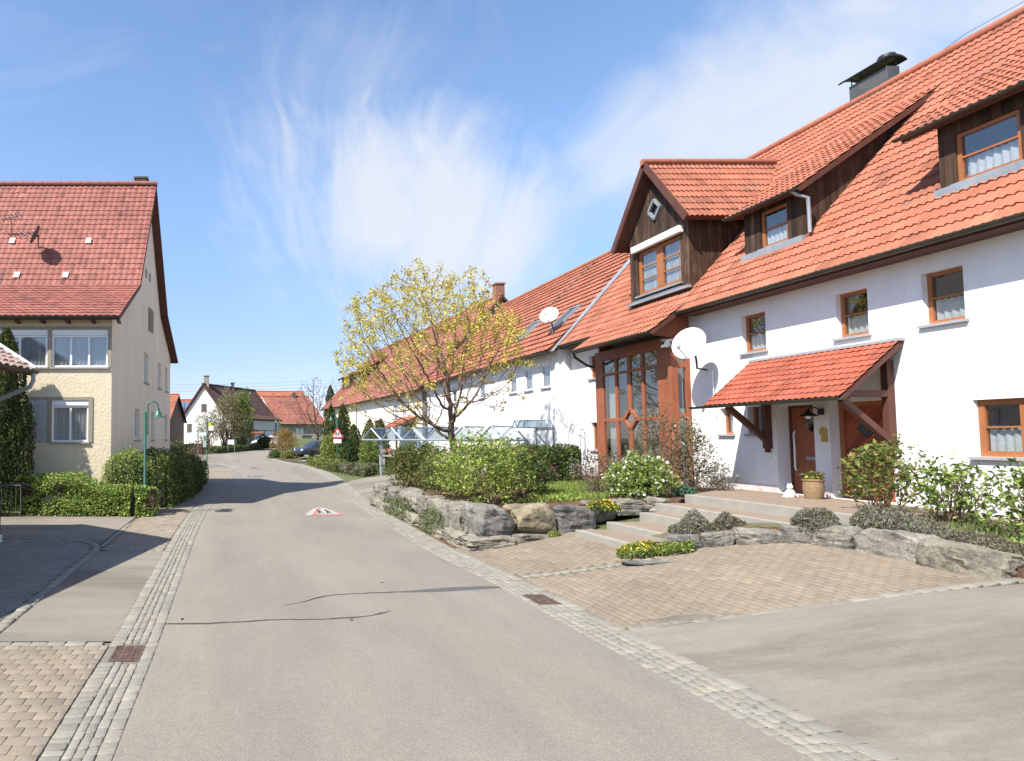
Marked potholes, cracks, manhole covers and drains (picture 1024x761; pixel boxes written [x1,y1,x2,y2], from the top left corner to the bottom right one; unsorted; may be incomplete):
crack [166,586,501,625]
drain grate [523,595,561,604]
drain grate [108,645,146,662]
